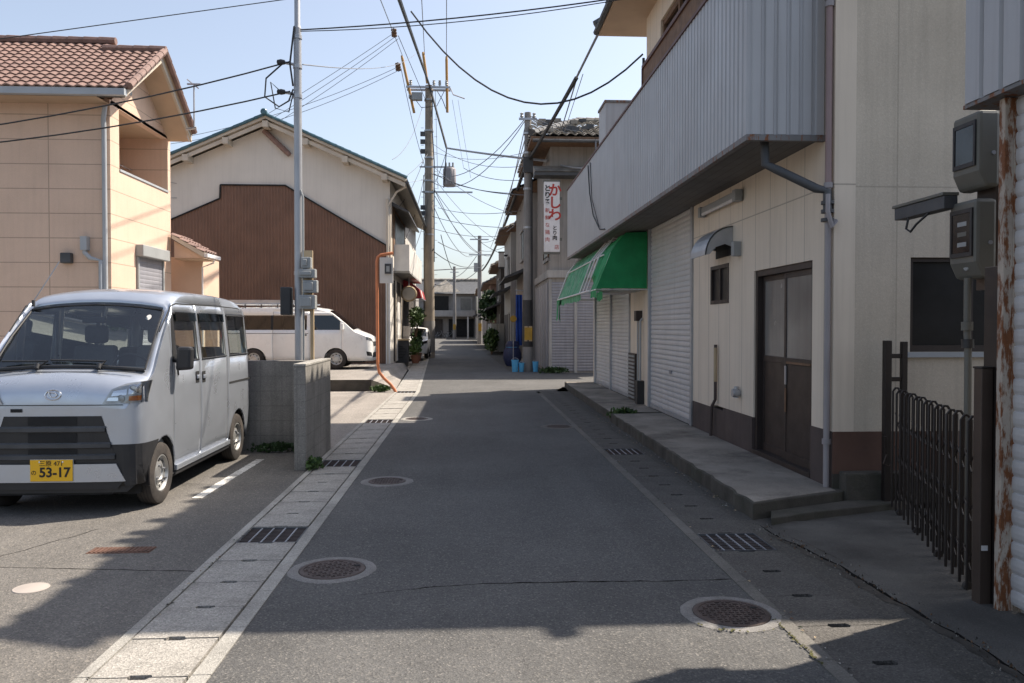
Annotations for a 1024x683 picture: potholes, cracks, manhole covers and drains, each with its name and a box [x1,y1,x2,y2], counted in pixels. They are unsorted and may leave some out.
crack [351,579,727,596]
manhole cover [360,476,413,487]
manhole cover [680,596,782,633]
drain grate [235,527,309,544]
drain grate [697,533,777,552]
manhole cover [287,557,376,584]
utility cover [12,582,50,594]
